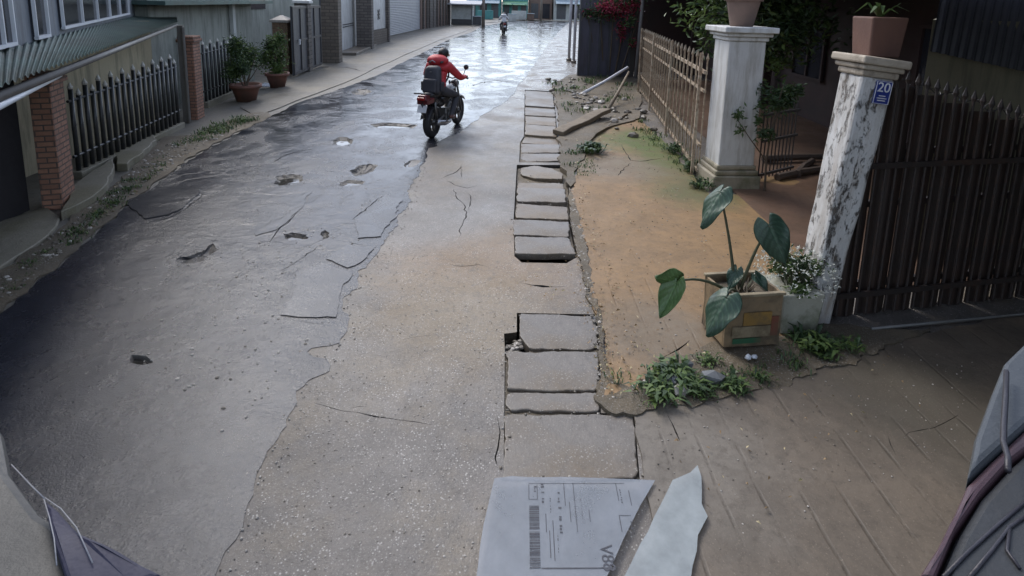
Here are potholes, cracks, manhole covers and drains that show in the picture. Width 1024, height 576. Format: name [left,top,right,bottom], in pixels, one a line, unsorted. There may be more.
crack [316,403,430,425]
pothole [349,164,378,176]
crack [443,167,477,237]
pothole [129,355,153,365]
pothole [284,232,308,240]
pothole [333,137,353,146]
pothole [176,243,217,264]
pothole [274,174,303,186]
